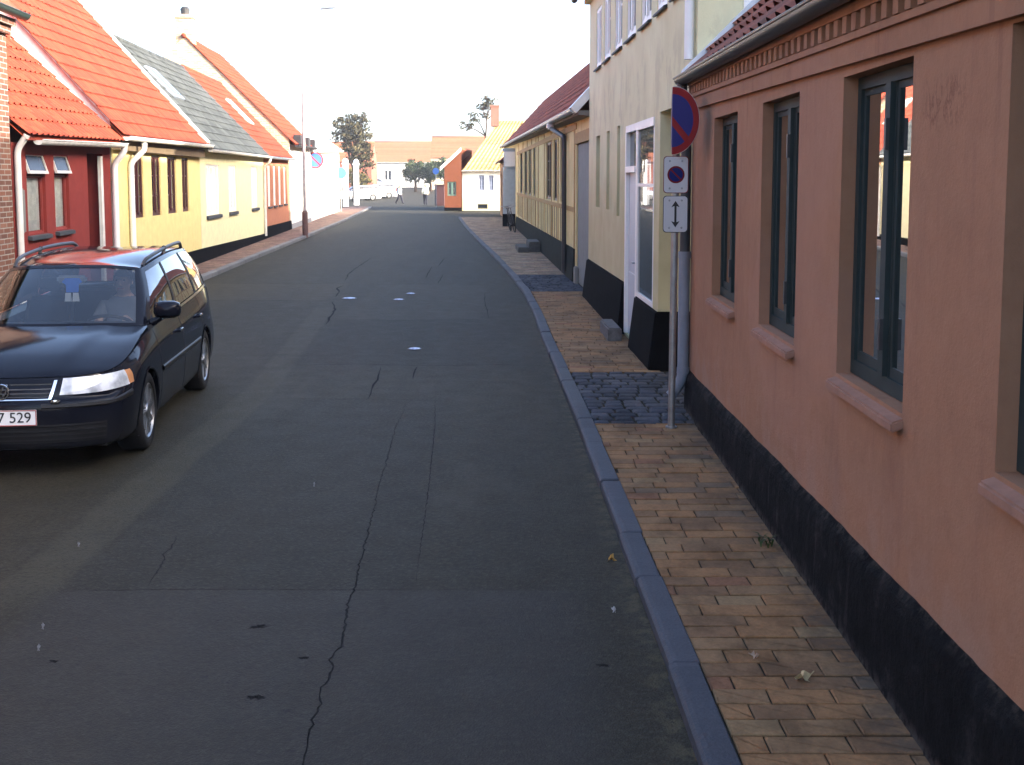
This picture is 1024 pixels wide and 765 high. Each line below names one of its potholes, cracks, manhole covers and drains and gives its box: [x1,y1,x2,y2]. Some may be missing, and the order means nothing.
crack [302,403,406,765]
crack [148,537,176,585]
